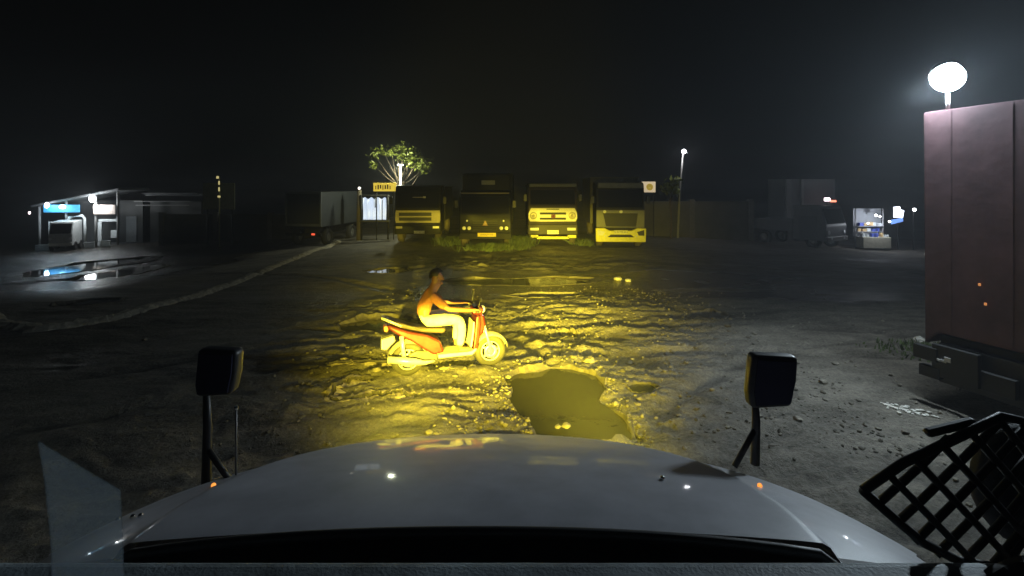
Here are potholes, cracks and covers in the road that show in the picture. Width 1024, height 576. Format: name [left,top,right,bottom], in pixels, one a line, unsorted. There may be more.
pothole [500,362,639,444]
pothole [625,380,660,394]
pothole [22,256,163,278]
pothole [67,264,172,282]
